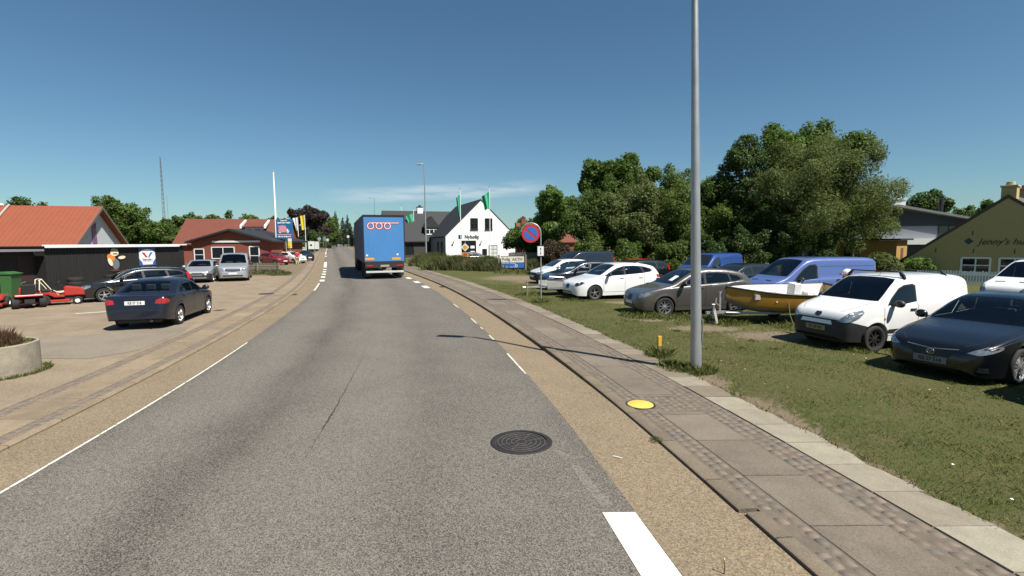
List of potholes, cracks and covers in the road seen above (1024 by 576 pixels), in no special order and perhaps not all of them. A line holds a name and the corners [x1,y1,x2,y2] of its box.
crack [305,346,367,458]
manhole cover [490,430,553,455]
